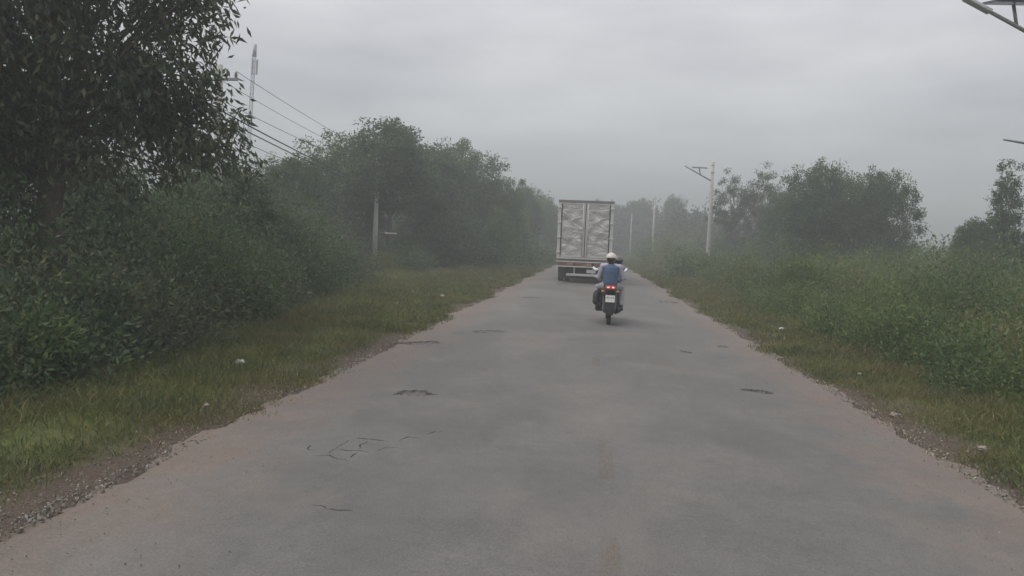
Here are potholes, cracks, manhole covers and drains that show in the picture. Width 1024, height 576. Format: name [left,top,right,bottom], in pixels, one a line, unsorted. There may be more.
crack [307,431,442,461]
